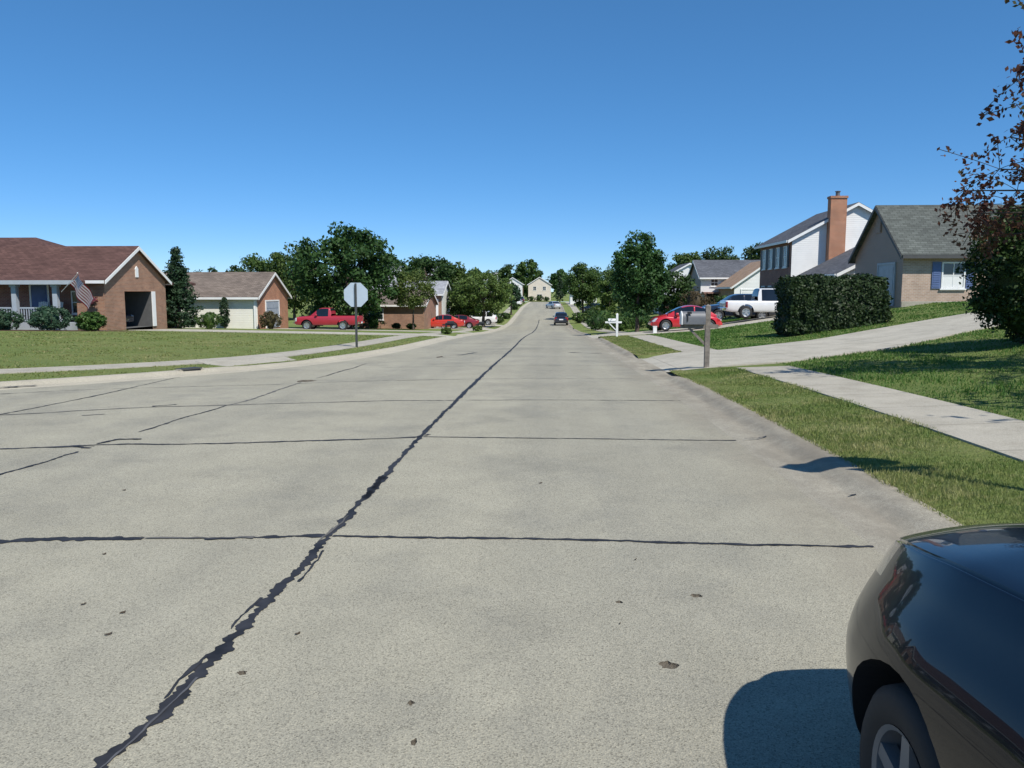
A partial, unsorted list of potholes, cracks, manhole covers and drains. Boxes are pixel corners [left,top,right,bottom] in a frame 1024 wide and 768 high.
pothole [658,660,680,669]
crack [0,357,735,475]
